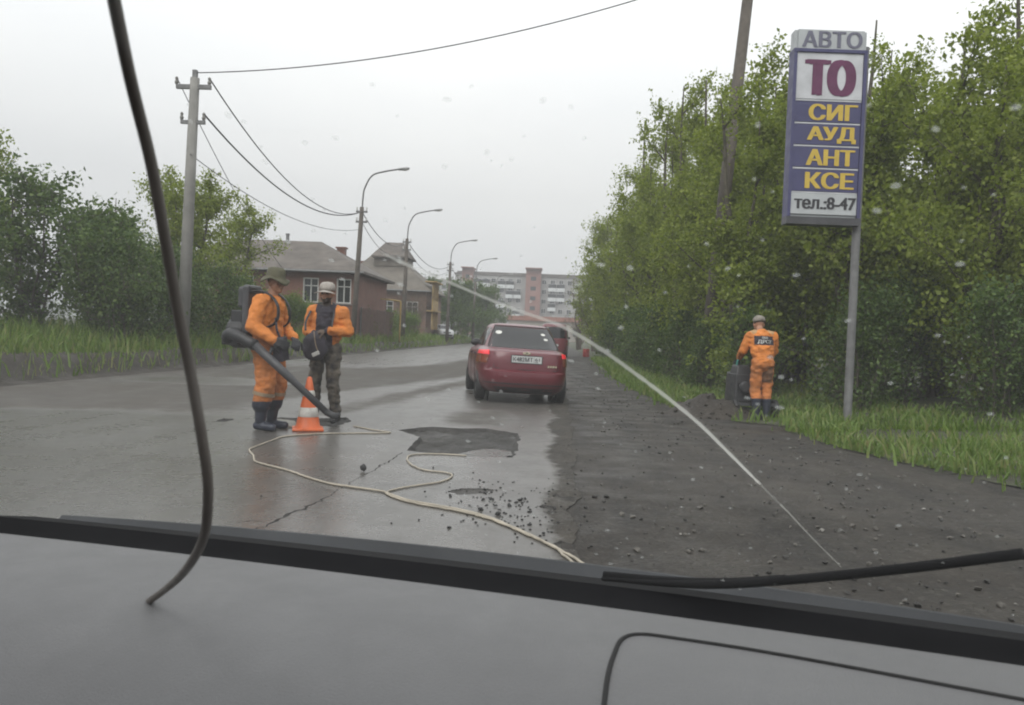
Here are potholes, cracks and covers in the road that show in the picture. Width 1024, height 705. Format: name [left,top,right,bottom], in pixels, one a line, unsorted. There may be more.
crack [234,453,401,529]
pothole [399,427,521,458]
